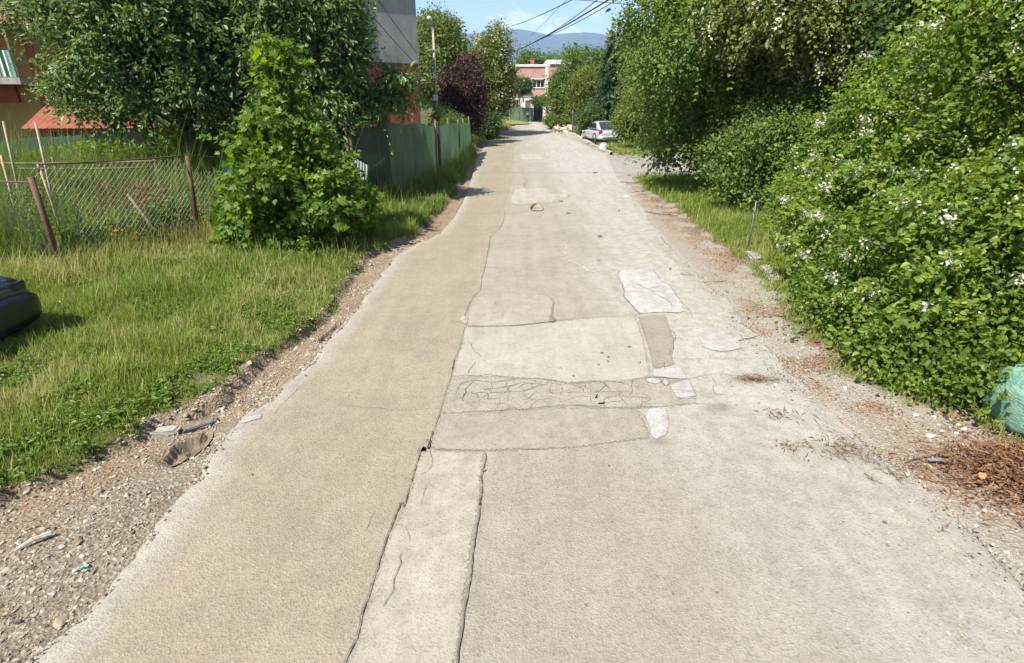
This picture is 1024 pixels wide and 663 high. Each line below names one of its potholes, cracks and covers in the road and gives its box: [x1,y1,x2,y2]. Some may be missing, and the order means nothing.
crack [455,333,747,420]
